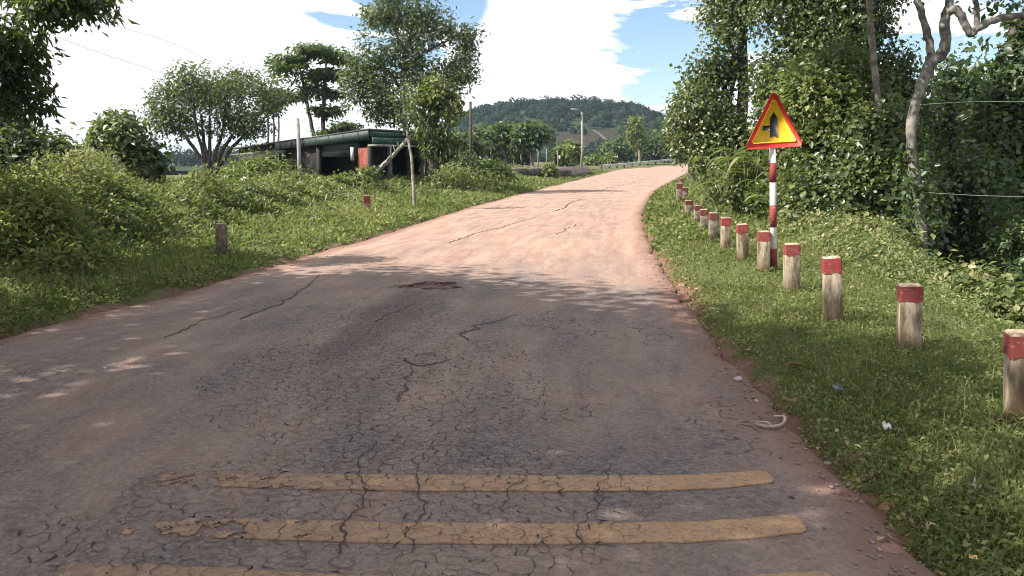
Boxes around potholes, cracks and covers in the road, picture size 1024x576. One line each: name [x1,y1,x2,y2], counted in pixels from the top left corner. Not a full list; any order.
crack [7,502,81,566]
crack [164,275,319,337]
crack [74,286,661,576]
crack [686,396,772,454]
pothole [389,281,471,292]
